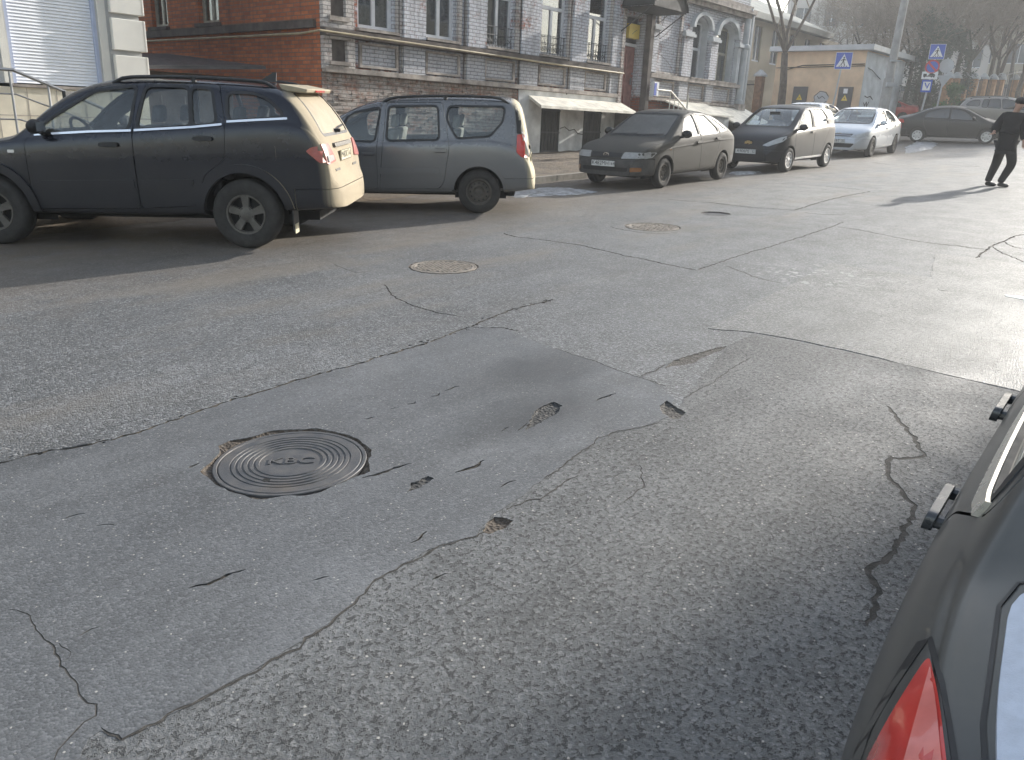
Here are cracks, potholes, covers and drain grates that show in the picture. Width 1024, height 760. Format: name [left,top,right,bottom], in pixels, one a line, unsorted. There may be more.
manhole cover [200,429,372,499]
pothole [526,403,561,430]
pothole [483,518,512,534]
crack [17,422,659,760]
manhole cover [408,260,479,274]
crack [864,406,927,626]
crack [504,186,1023,283]
pothole [408,477,432,492]
pothole [660,402,685,419]
manhole cover [625,223,680,231]
